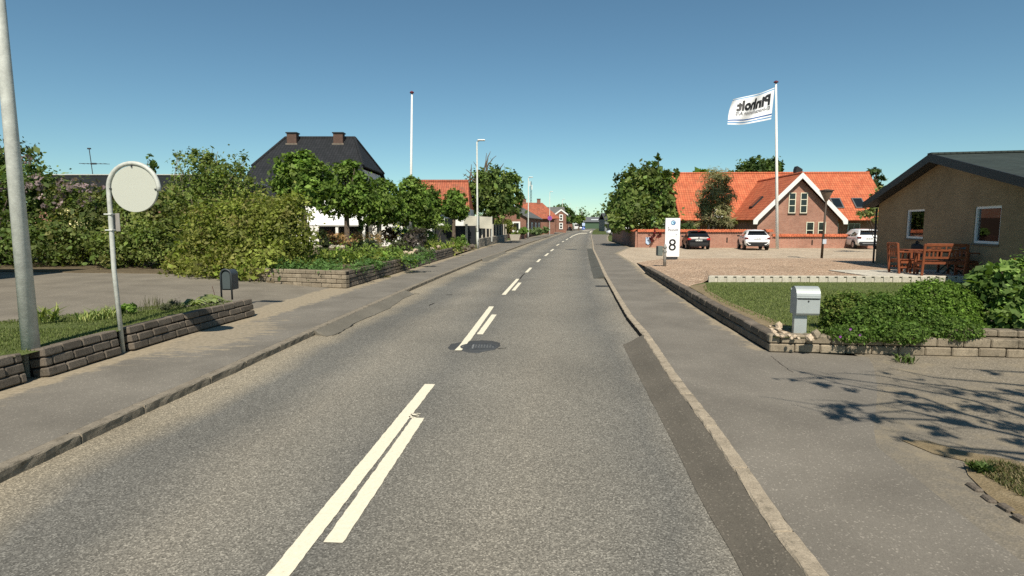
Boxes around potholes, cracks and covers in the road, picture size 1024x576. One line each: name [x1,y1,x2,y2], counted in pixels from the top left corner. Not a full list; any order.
manhole cover [448,340,500,353]
